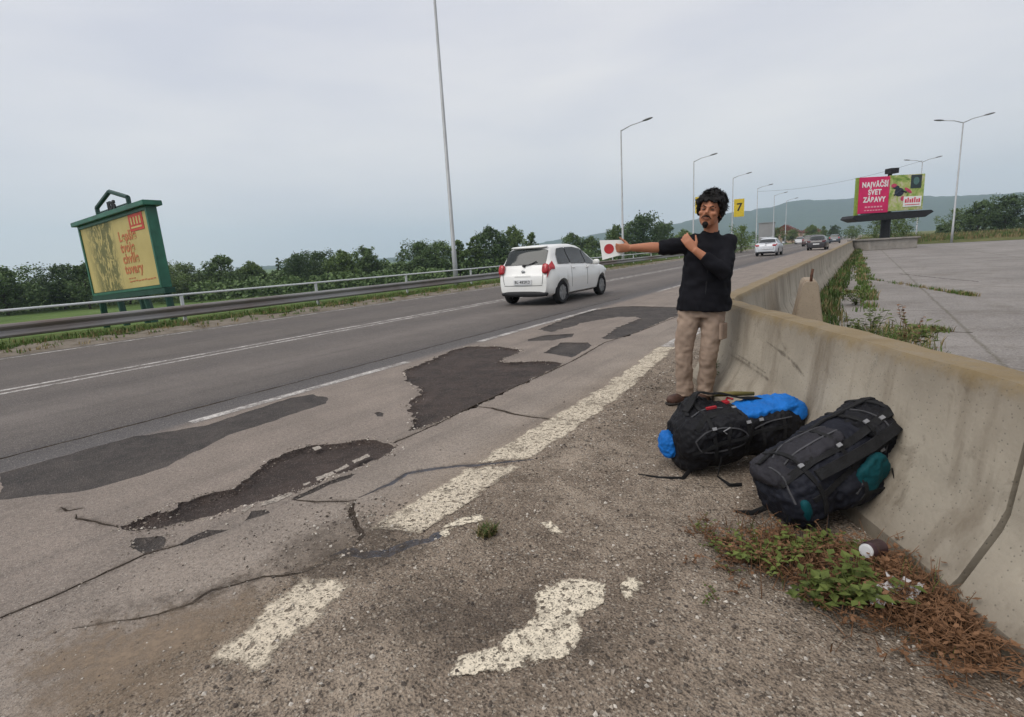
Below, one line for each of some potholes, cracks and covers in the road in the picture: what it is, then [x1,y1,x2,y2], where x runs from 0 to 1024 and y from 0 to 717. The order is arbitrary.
pothole [121,439,395,531]
crack [61,507,119,528]
crack [474,406,573,421]
crack [73,499,365,629]
